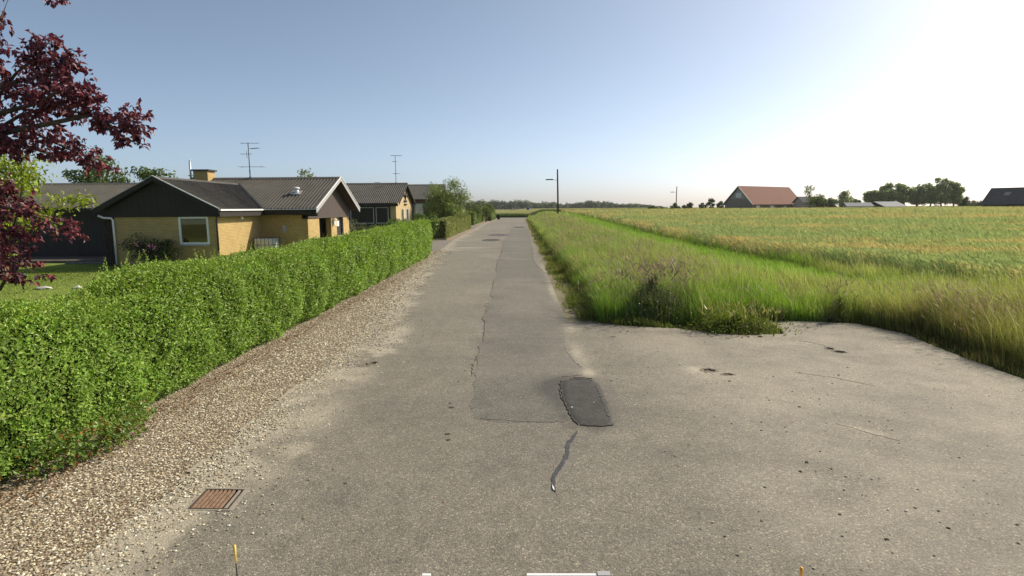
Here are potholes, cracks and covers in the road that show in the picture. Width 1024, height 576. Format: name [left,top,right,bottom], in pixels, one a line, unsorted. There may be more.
drain grate [185,487,250,511]
